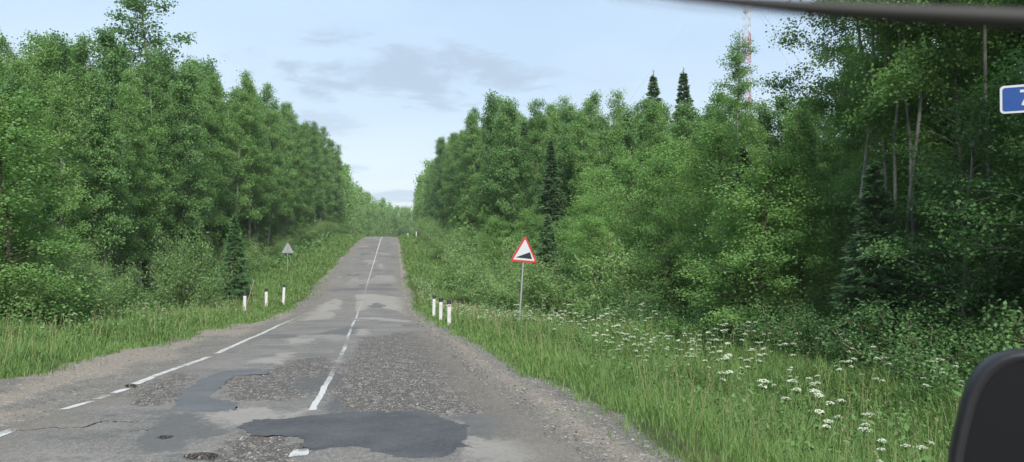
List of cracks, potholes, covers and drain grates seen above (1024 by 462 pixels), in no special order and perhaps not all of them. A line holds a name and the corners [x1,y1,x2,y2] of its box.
crack [0,421,158,432]
pothole [175,451,228,462]
